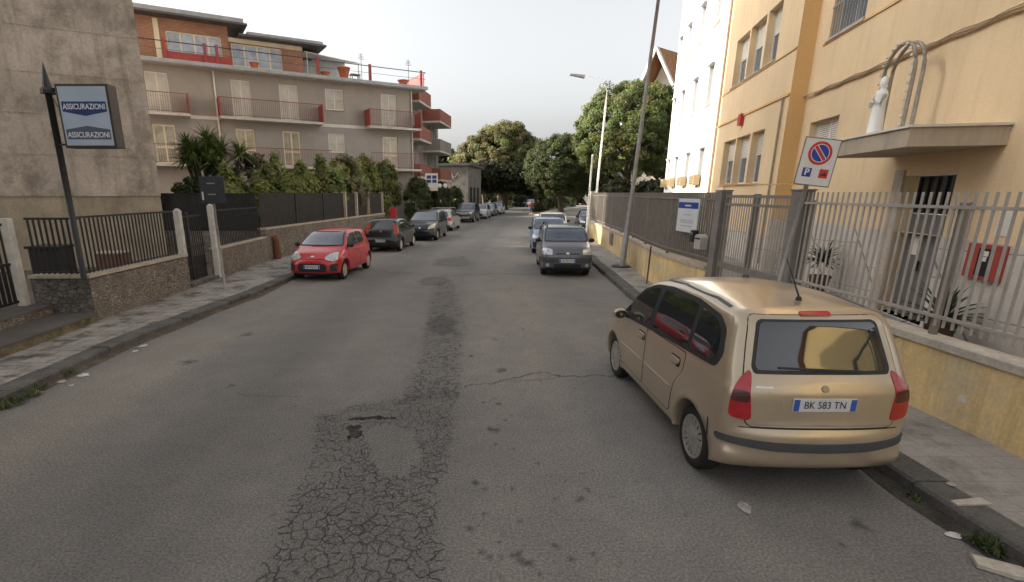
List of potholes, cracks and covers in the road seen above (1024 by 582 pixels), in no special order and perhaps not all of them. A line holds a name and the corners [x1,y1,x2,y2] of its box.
crack [255,390,461,582]
crack [403,282,615,399]
pothole [341,423,368,442]
